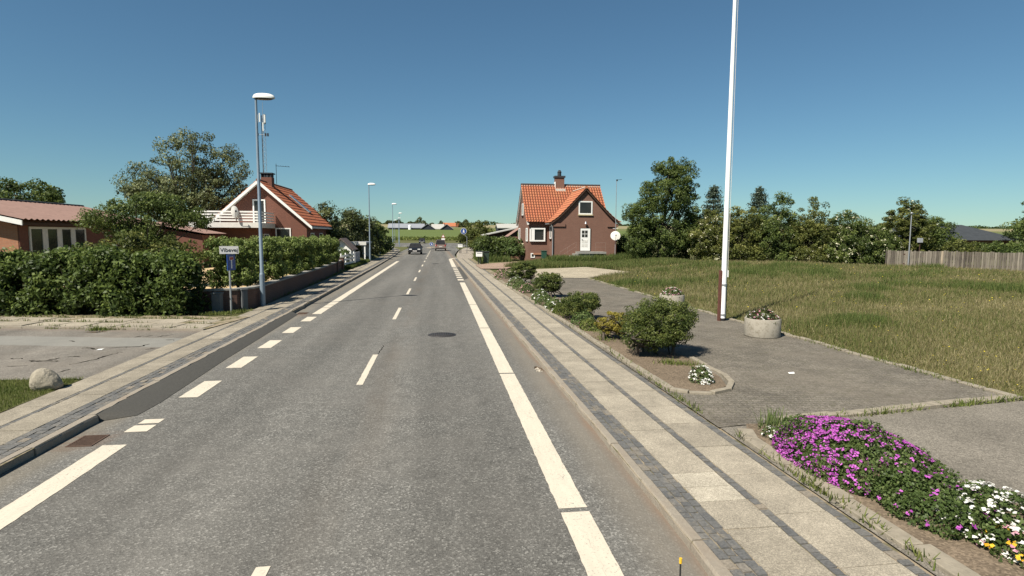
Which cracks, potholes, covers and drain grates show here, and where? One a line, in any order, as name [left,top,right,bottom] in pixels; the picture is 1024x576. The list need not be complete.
drain grate [65,434,110,447]
